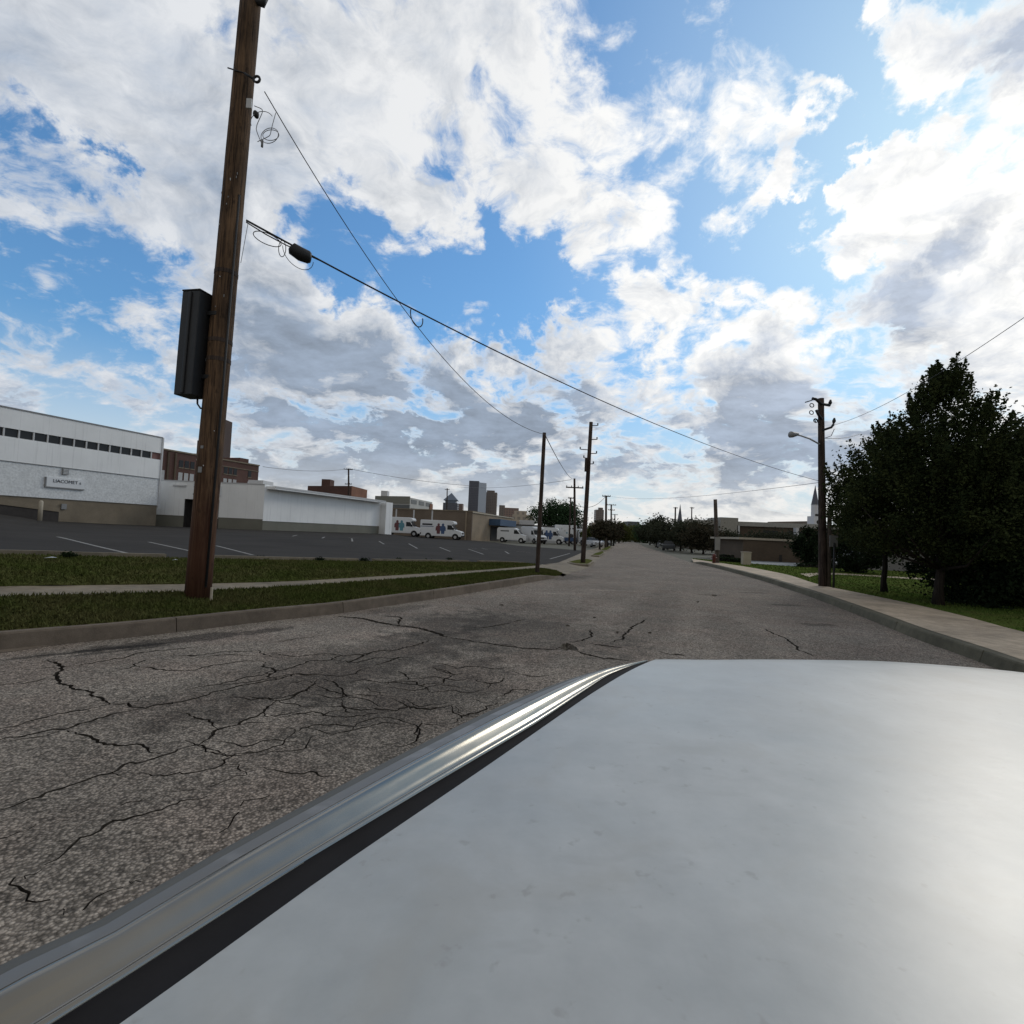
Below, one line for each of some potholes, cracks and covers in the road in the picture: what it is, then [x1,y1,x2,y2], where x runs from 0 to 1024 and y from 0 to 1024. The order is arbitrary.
crack [766,629,813,656]
crack [576,620,645,661]
crack [0,616,557,915]
